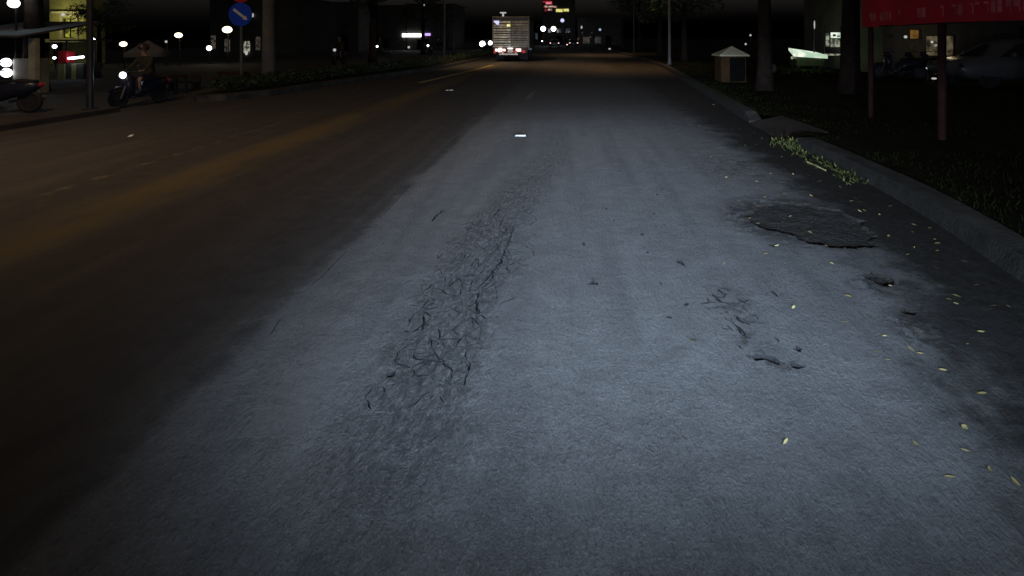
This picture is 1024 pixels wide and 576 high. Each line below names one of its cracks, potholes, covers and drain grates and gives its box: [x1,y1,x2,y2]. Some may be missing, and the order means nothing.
pothole [743,201,879,249]
crack [703,289,779,350]
crack [269,134,461,336]
pothole [861,272,895,287]
crack [365,158,554,412]
